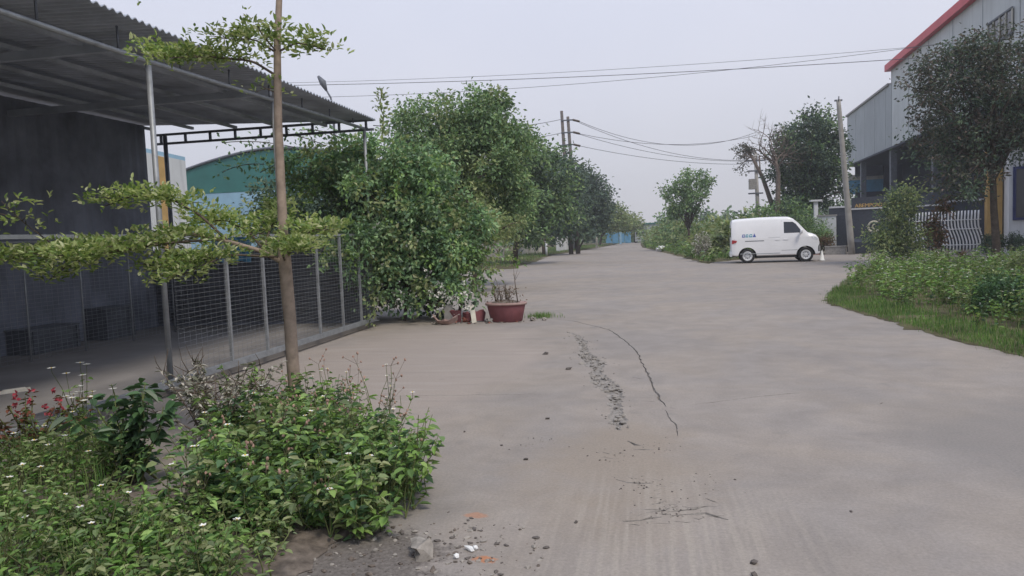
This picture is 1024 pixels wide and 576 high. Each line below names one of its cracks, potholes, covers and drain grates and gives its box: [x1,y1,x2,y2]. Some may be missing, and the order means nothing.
crack [616,477,729,526]
pothole [563,332,631,430]
crack [560,319,678,459]
